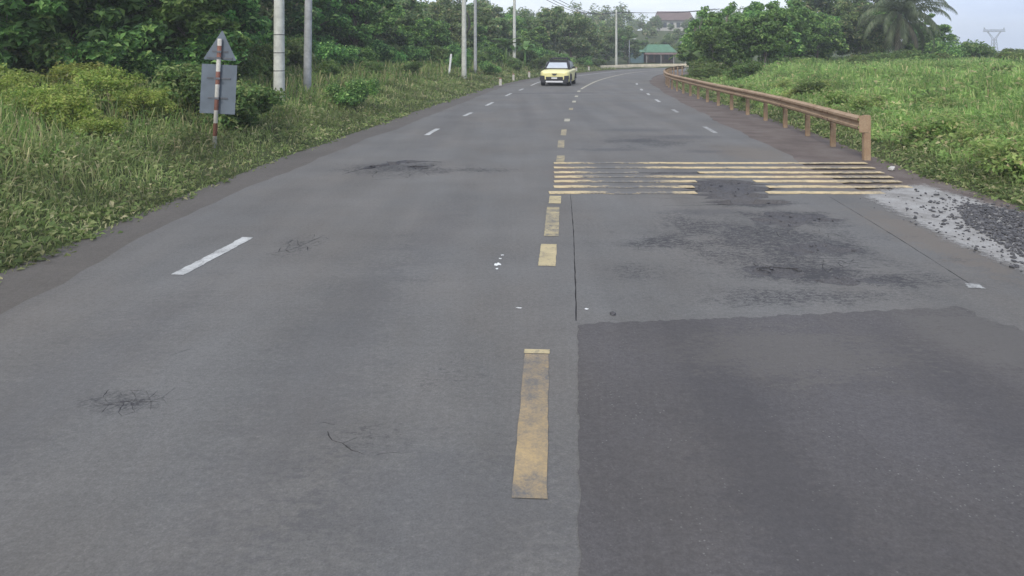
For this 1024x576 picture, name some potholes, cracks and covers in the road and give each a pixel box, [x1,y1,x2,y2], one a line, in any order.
crack [315,422,410,455]
crack [79,390,168,416]
crack [269,235,328,257]
